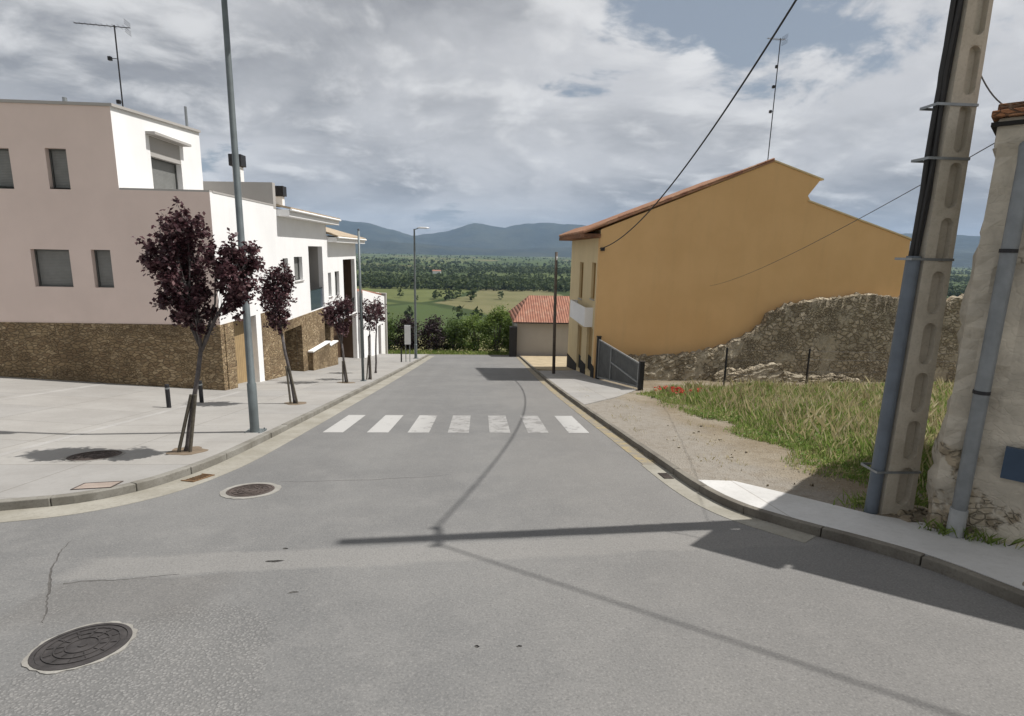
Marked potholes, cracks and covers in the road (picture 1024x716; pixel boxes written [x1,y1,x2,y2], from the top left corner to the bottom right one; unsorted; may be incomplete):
drain grate [181,473,215,482]
manhole cover [220,482,282,499]
manhole cover [62,450,126,462]
crack [41,541,178,623]
manhole cover [70,481,124,490]
manhole cover [21,621,138,675]
